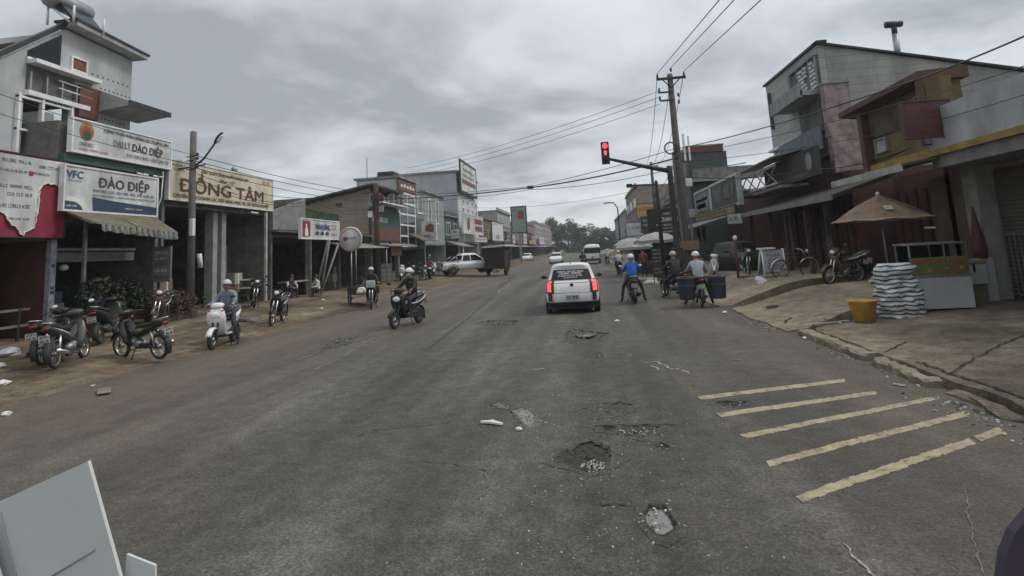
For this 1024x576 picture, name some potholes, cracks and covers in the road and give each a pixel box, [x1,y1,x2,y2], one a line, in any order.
crack [964,484,985,576]
crack [627,354,690,374]
pothole [539,435,624,480]
pothole [584,420,668,442]
pothole [634,497,689,548]
crack [844,543,875,576]
pothole [321,337,356,347]
pothole [488,400,514,410]
pothole [705,399,755,409]
pothole [555,328,615,347]
